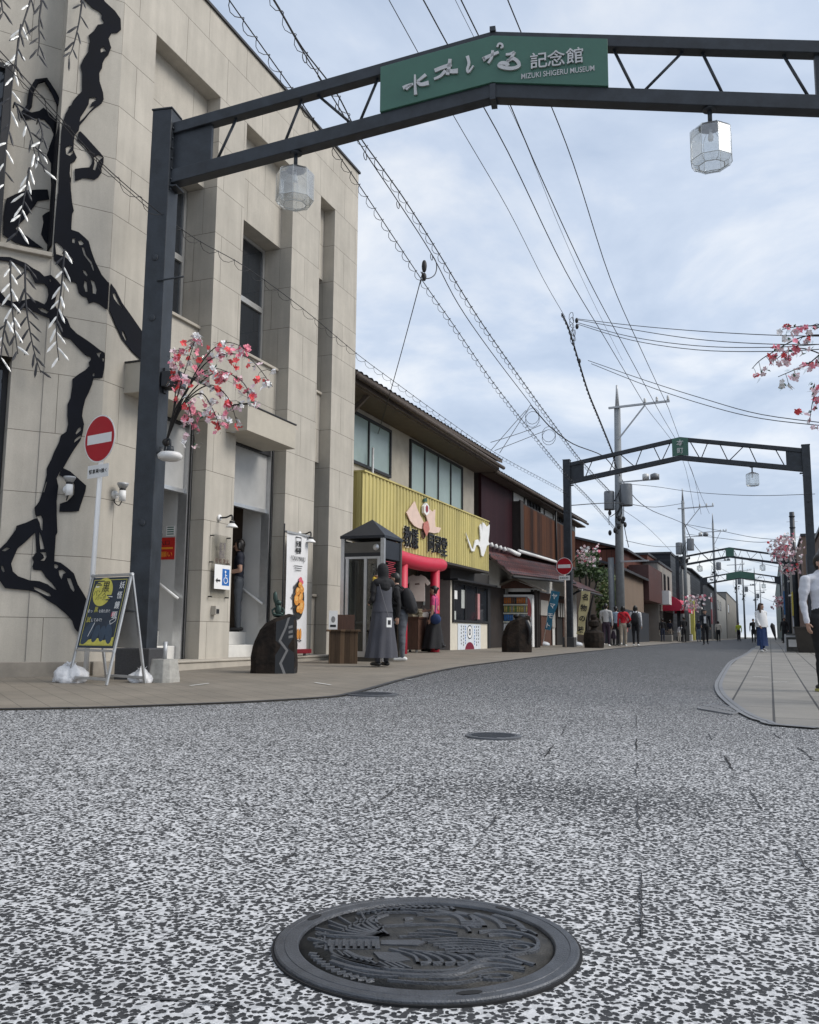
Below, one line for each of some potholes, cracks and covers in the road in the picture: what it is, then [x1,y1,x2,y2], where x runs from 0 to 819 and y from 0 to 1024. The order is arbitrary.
manhole cover [465,732,521,740]
crack [708,733,813,874]
manhole cover [271,897,583,1009]
crack [463,726,581,852]
crack [635,716,644,937]
